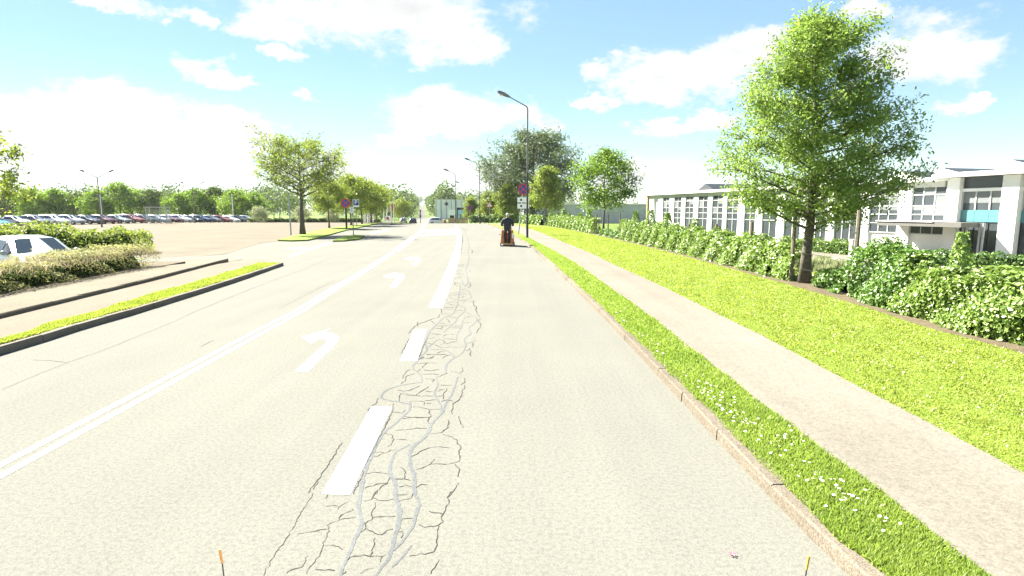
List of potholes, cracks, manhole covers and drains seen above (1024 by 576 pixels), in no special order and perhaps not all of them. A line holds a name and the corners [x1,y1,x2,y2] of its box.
crack [264,227,481,576]
